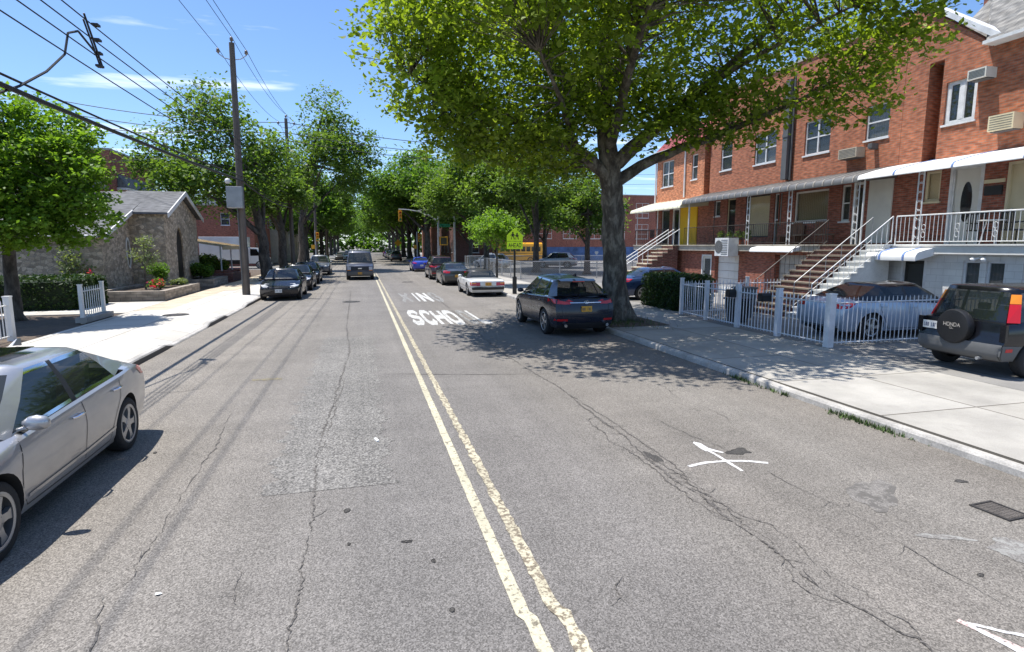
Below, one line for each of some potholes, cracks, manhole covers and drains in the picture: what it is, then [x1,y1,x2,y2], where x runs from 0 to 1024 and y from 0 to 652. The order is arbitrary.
crack [429,292,1020,652]
crack [285,294,355,651]
crack [89,596,104,652]
